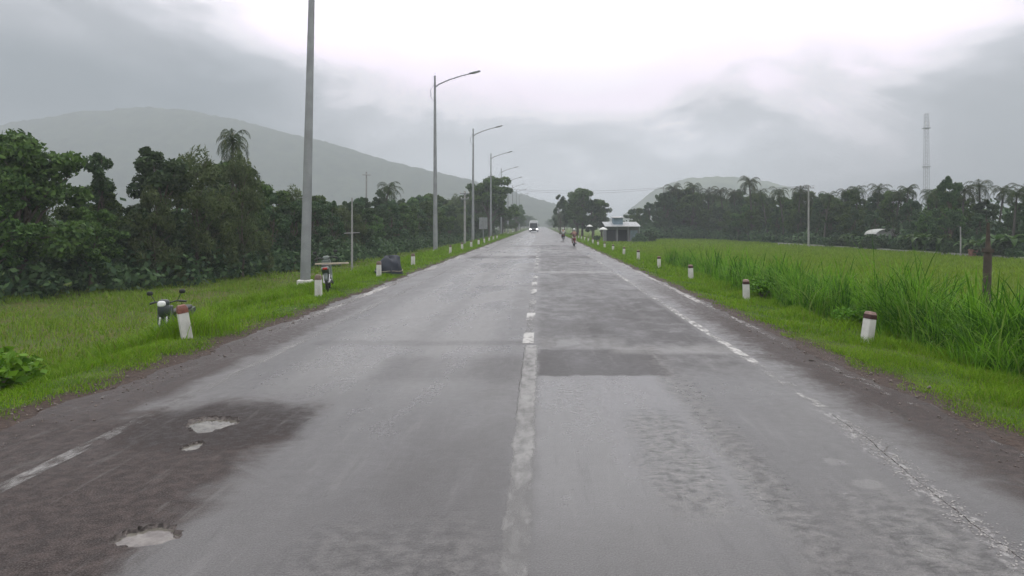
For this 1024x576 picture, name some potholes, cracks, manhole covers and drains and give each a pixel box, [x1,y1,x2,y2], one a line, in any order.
pothole [108,523,184,548]
pothole [183,415,242,433]
pothole [179,440,205,451]
